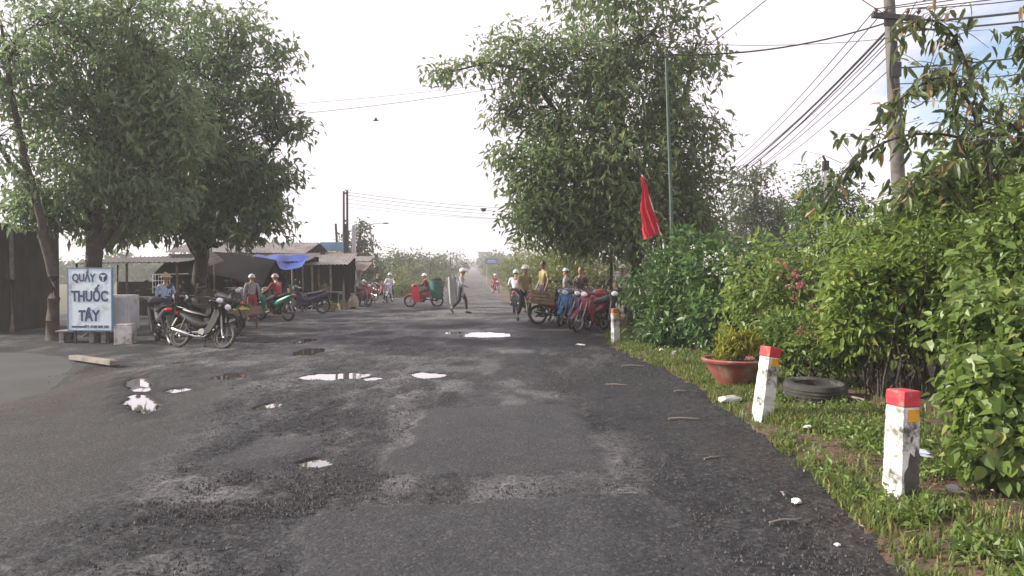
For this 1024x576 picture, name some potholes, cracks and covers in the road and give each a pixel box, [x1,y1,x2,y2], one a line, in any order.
pothole [126,378,152,392]
pothole [299,372,371,381]
pothole [125,394,160,413]
pothole [297,460,332,468]
pothole [294,348,325,356]
